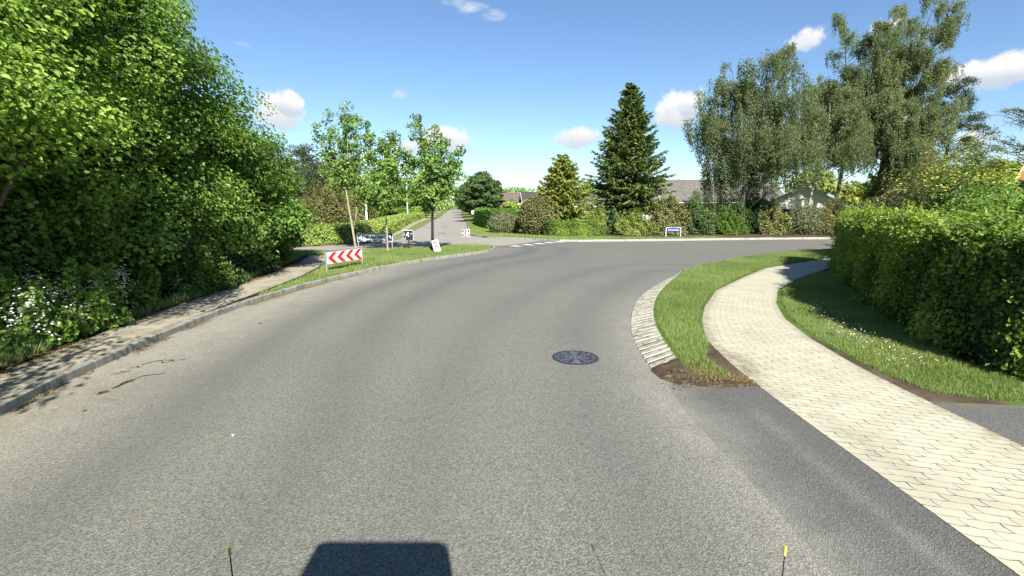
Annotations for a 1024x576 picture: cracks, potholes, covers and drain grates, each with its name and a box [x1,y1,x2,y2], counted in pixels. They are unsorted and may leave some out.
crack [110,359,184,378]
manhole cover [552,350,599,365]
